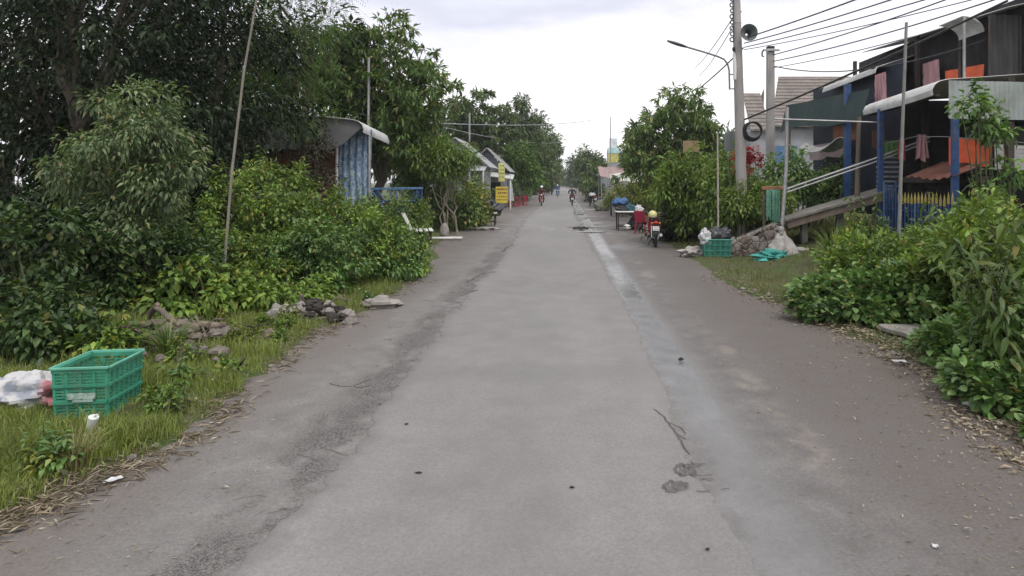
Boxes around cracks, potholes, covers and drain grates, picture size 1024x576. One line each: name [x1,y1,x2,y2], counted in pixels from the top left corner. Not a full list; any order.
pothole [673,463,697,477]
crack [233,272,494,532]
pothole [662,479,689,493]
crack [653,409,730,493]
